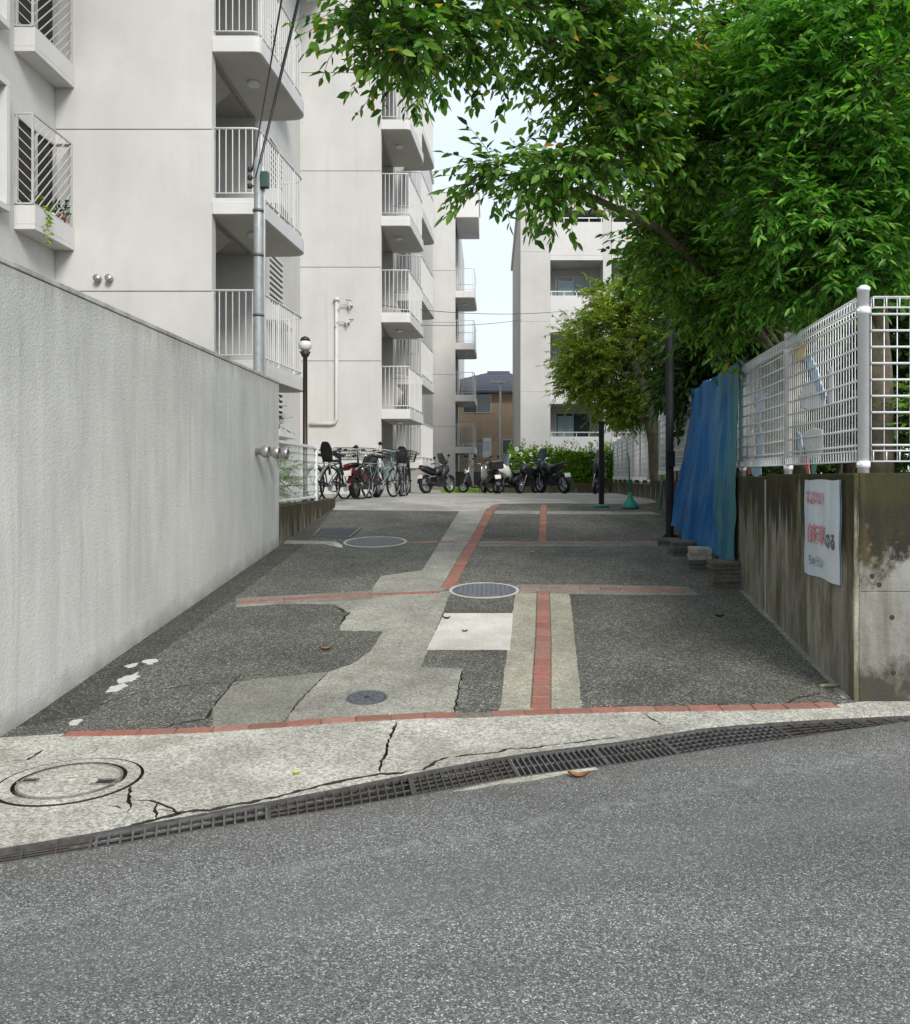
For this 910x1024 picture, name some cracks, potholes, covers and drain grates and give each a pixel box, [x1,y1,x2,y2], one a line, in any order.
manhole cover [449,582,519,598]
manhole cover [346,690,388,705]
crack [111,736,623,830]
manhole cover [0,758,144,807]
manhole cover [343,536,407,547]
drain grate [312,527,362,538]
